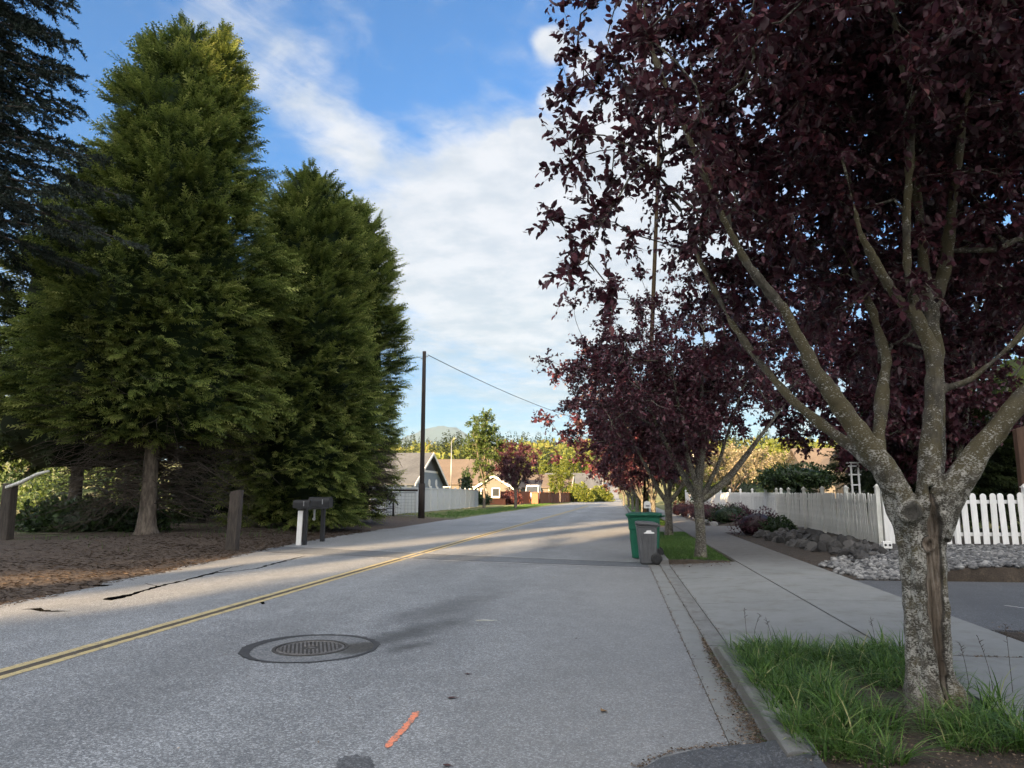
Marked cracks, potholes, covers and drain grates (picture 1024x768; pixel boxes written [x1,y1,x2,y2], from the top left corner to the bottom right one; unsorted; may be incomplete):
manhole cover [238,634,381,663]
crack [103,556,303,600]
